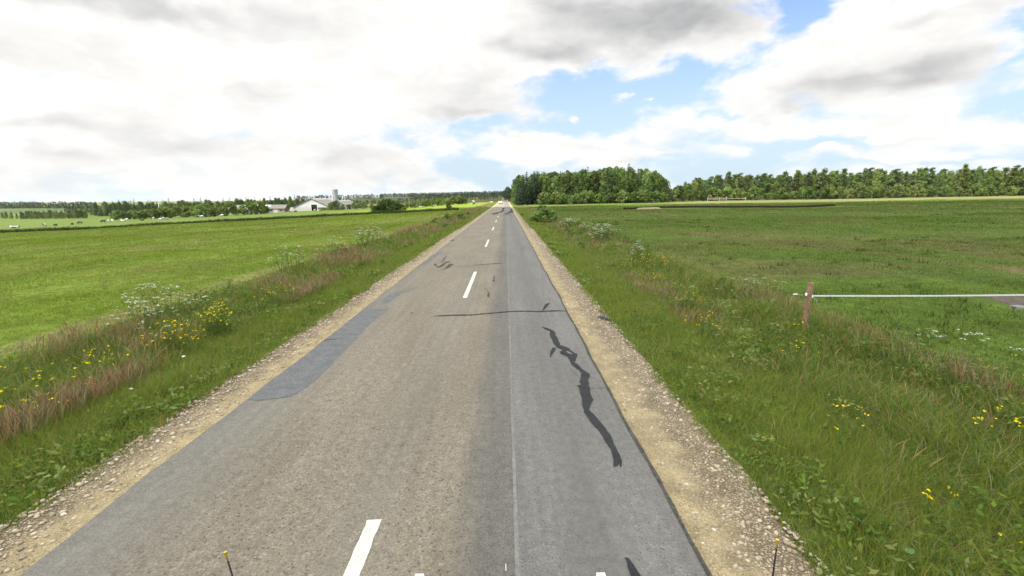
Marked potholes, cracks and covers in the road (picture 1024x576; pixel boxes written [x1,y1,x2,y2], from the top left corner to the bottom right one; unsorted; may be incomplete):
crack [434,256,502,297]
crack [542,327,622,467]
